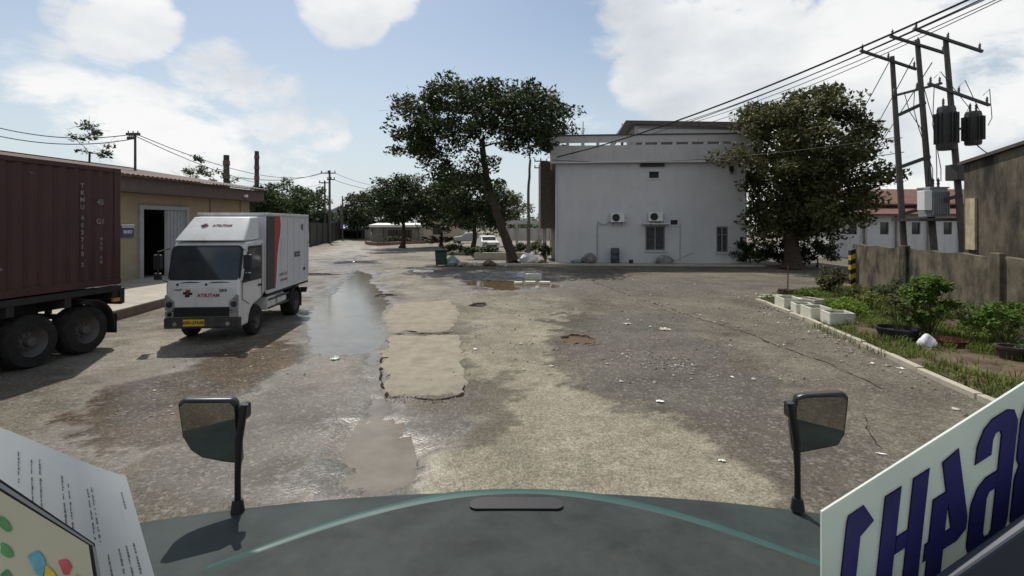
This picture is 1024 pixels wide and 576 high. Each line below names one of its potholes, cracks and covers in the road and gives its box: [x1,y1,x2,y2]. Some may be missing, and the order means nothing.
pothole [554,333,601,346]
